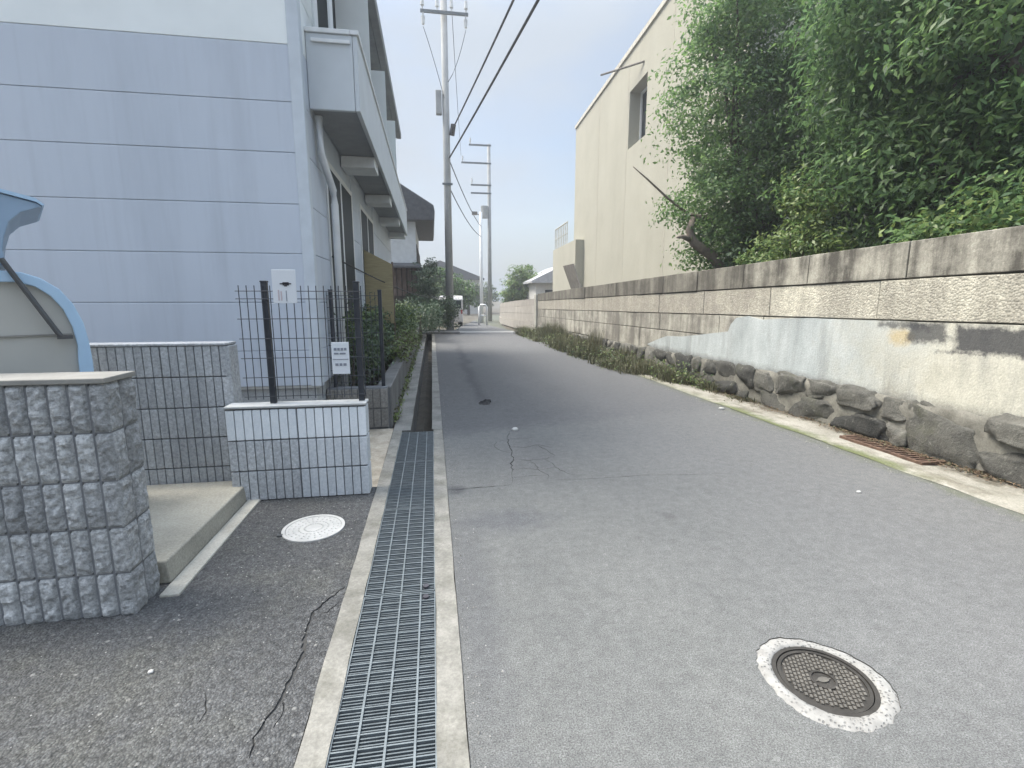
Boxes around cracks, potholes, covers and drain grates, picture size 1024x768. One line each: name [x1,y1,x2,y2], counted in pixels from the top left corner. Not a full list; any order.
drain grate [395,431,434,462]
drain grate [384,461,434,510]
drain grate [364,507,435,597]
manhole cover [277,514,345,543]
crack [458,434,739,490]
drain grate [325,591,437,768]
crack [249,587,345,758]
manhole cover [756,638,901,733]
drain grate [839,434,946,465]
